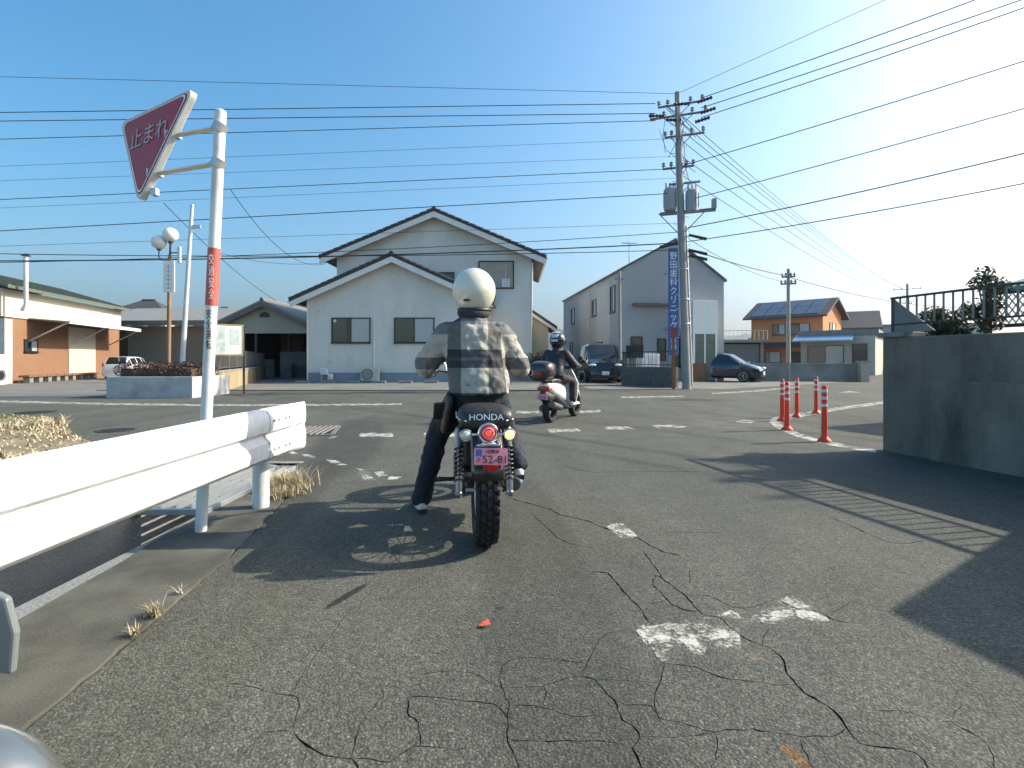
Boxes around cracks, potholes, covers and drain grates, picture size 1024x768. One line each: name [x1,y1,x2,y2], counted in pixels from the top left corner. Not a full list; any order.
drain grate [305,425,341,436]
crack [233,499,995,768]
